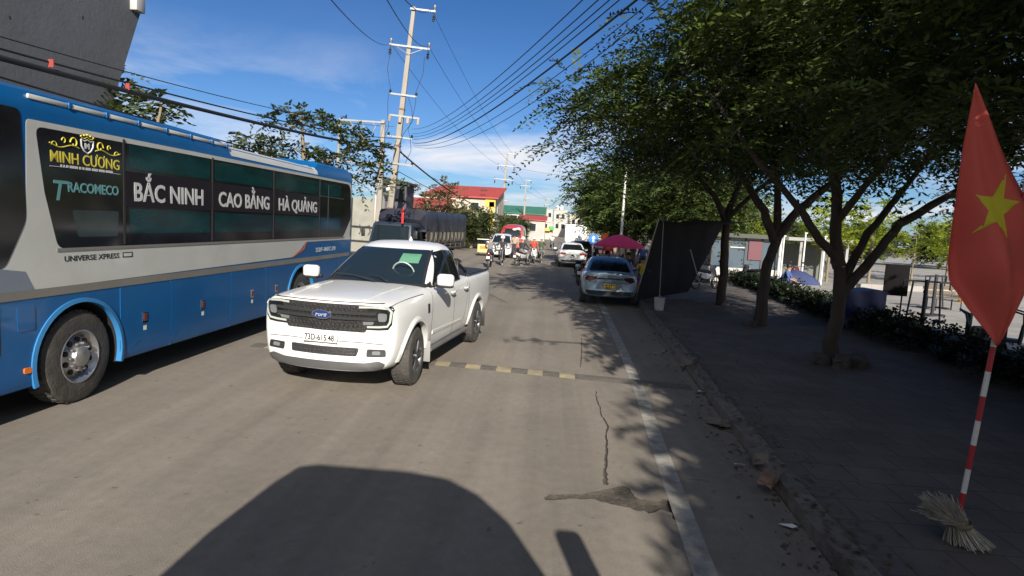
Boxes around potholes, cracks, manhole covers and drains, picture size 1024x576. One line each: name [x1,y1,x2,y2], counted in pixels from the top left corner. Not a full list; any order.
pothole [544,486,675,520]
crack [595,392,609,485]
